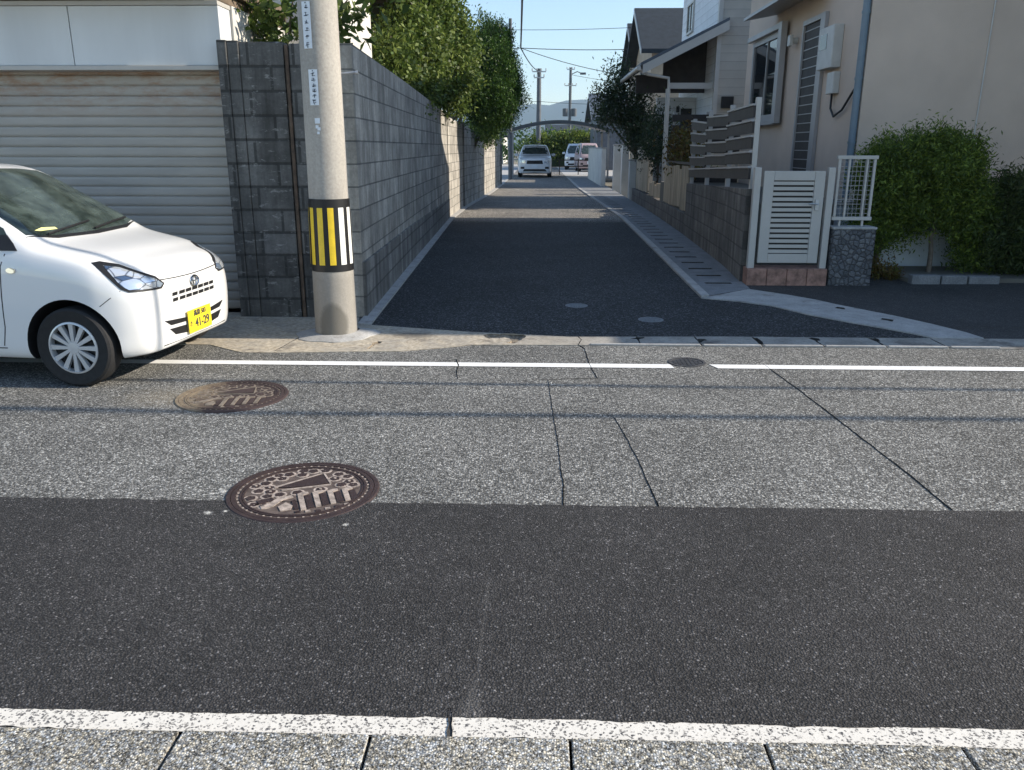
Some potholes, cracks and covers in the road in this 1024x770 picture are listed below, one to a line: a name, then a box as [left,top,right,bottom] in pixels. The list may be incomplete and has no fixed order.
manhole cover [668,357,706,367]
manhole cover [174,380,289,413]
manhole cover [225,462,380,523]
crack [614,417,659,506]
crack [539,337,597,505]
